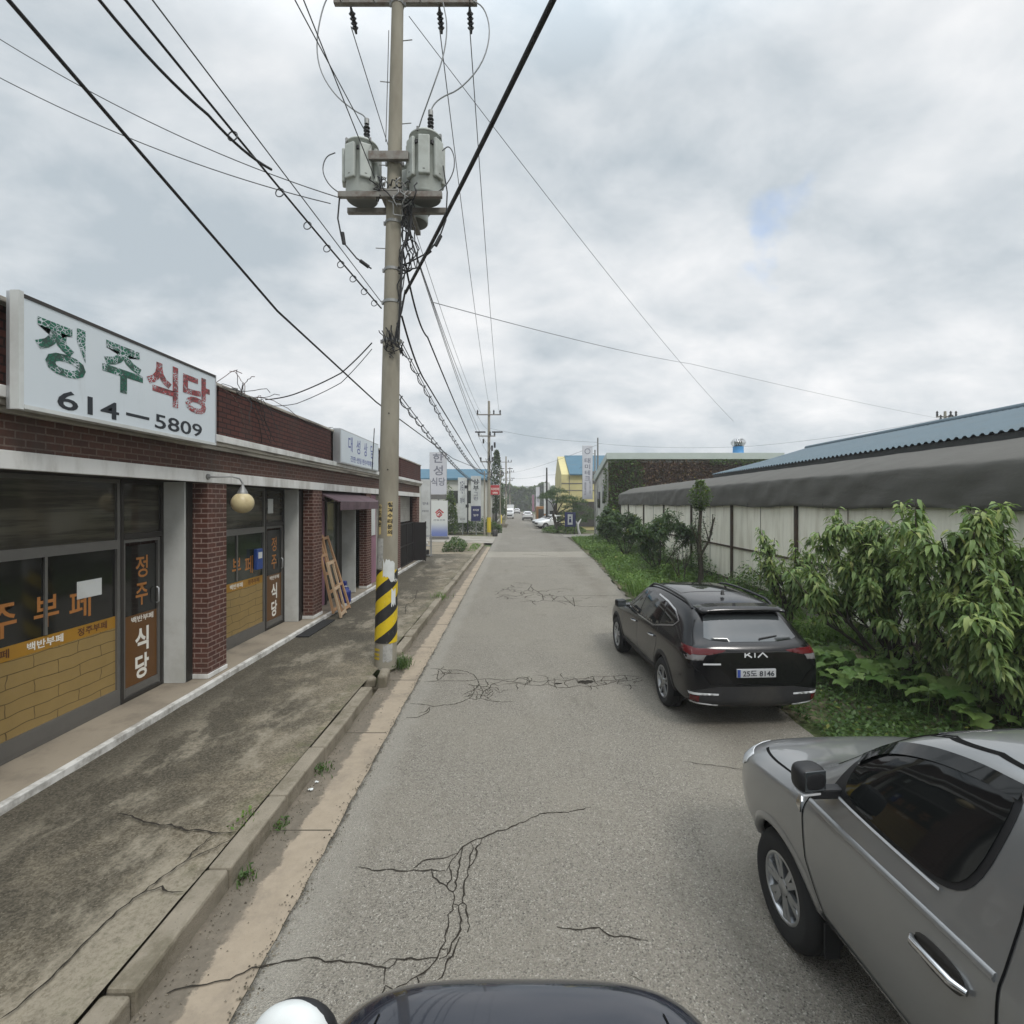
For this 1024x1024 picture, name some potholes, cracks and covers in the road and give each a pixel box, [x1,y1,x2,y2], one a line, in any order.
crack [0,807,588,1019]
crack [407,668,642,718]
crack [494,582,619,607]
crack [557,926,648,941]
